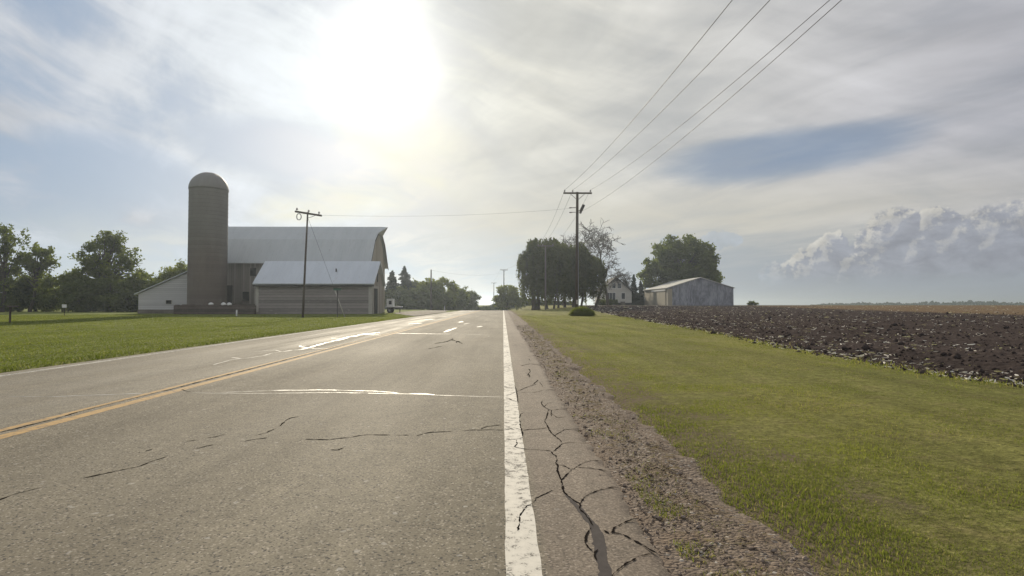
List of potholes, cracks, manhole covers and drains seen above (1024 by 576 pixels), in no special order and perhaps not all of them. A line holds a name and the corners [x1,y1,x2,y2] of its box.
crack [313,359,656,576]
